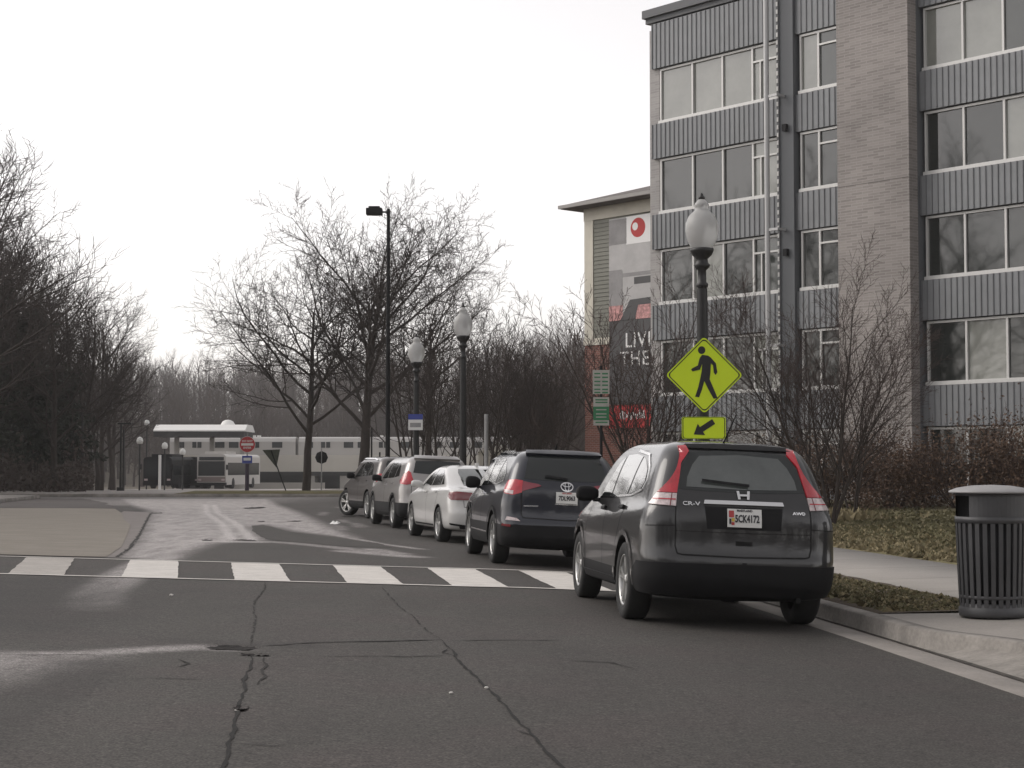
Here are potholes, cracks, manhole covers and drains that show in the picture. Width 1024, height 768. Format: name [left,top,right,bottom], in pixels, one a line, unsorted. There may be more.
crack [220,582,565,768]
